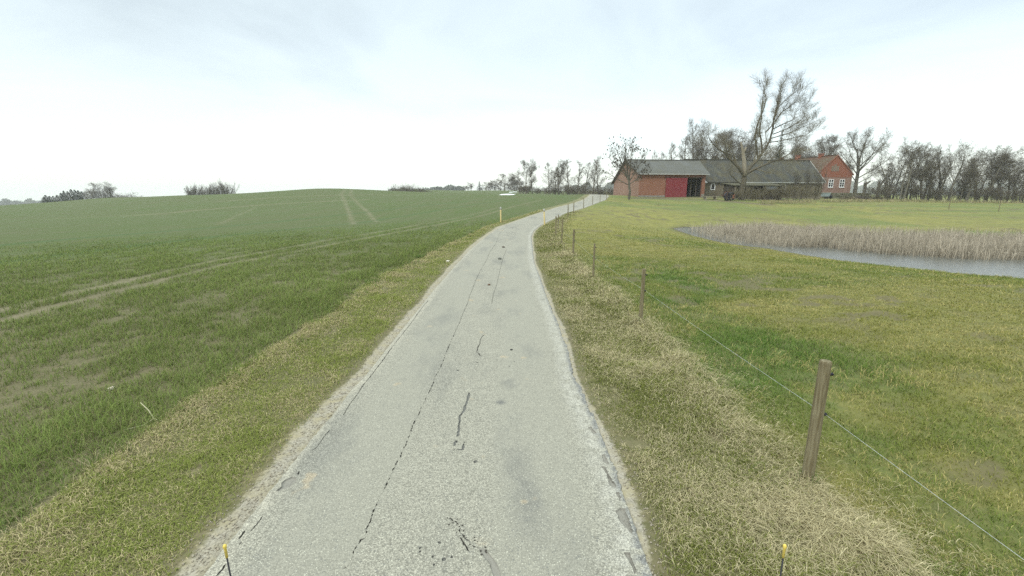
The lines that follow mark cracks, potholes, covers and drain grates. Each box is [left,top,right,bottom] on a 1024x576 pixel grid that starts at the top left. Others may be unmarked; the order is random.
crack [344,241,497,569]
crack [313,301,428,450]
